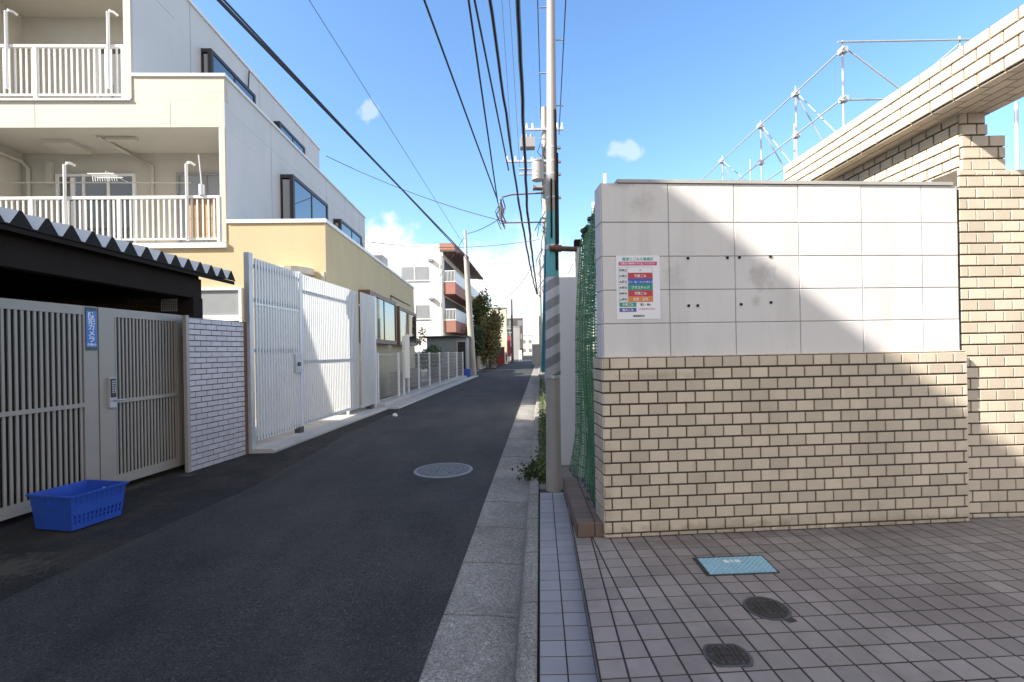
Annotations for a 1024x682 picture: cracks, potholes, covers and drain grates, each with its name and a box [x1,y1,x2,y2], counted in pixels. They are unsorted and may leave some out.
manhole cover [693,555,780,576]
manhole cover [414,463,473,478]
